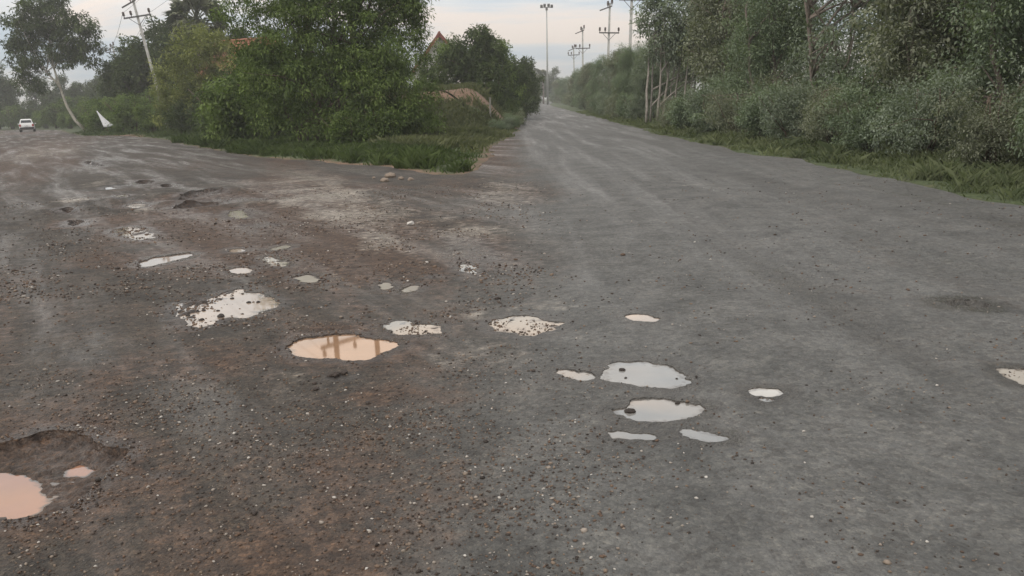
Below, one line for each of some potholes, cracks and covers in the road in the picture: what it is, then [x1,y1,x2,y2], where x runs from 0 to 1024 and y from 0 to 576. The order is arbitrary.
pothole [174,289,281,328]
pothole [600,361,692,389]
pothole [381,321,442,335]
pothole [286,333,400,361]
pothole [138,253,194,267]
pothole [0,429,130,519]
pothole [488,315,565,336]
pothole [112,227,155,240]
pothole [611,397,706,422]
pothole [178,187,224,200]
pothole [556,369,596,381]
